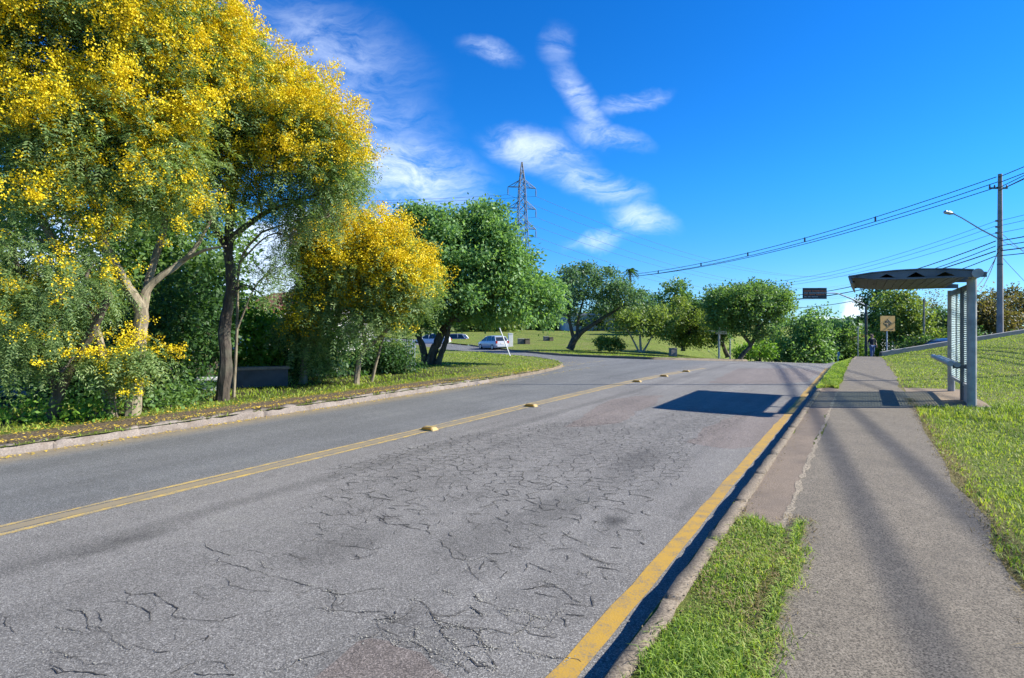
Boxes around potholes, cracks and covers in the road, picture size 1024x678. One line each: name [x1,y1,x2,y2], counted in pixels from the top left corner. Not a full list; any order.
crack [2,402,750,678]
